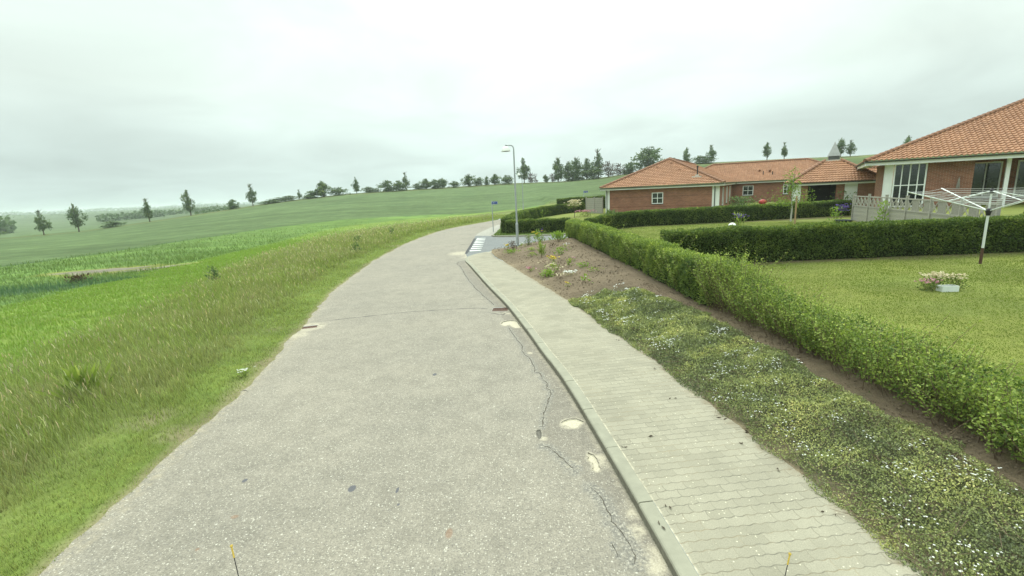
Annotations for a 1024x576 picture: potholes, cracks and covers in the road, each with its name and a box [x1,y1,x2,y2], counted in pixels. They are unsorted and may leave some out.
pothole [561,418,584,428]
pothole [588,452,600,472]
